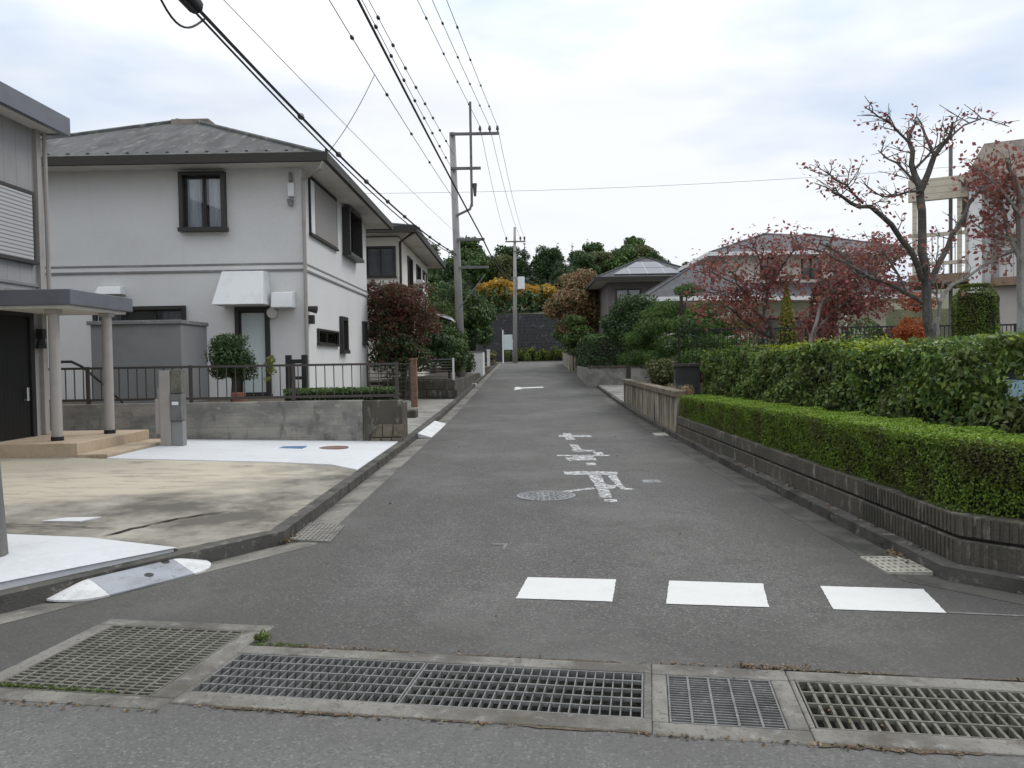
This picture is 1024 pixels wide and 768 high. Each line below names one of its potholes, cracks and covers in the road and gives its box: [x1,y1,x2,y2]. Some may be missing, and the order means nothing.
drain grate [0,625,245,697]
crack [22,510,229,536]
drain grate [667,675,788,730]
drain grate [796,681,1024,741]
manhole cover [517,490,576,501]
drain grate [398,663,644,718]
